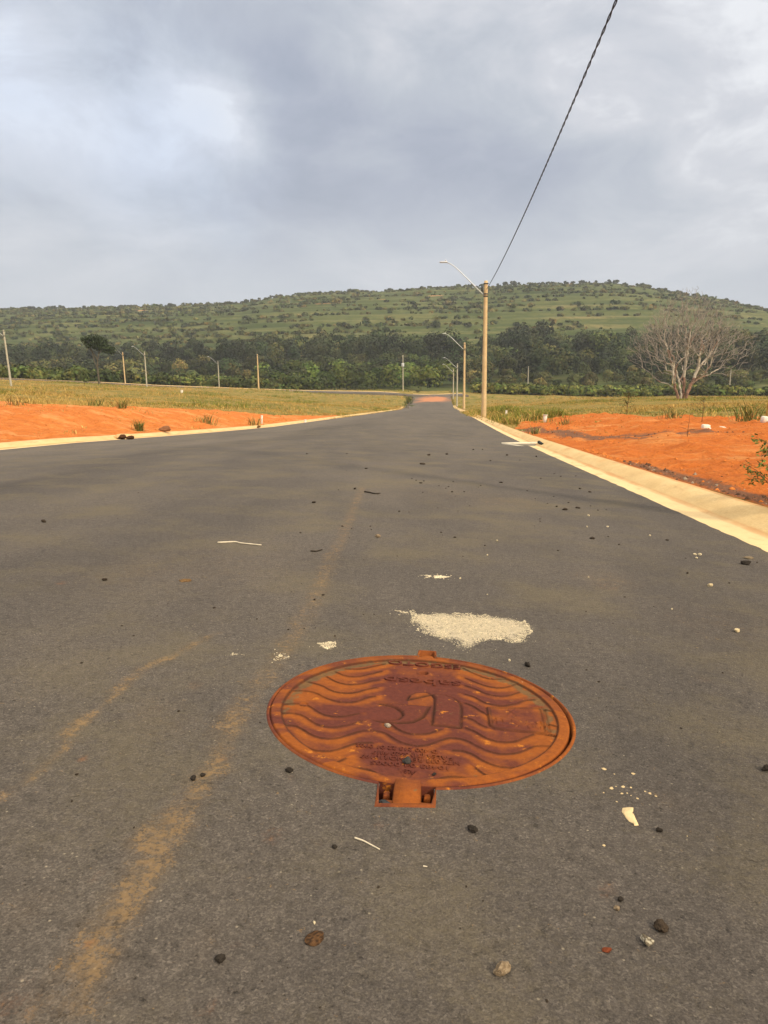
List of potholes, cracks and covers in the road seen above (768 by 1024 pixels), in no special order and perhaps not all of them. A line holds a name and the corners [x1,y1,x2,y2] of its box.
manhole cover [266,650,576,808]
